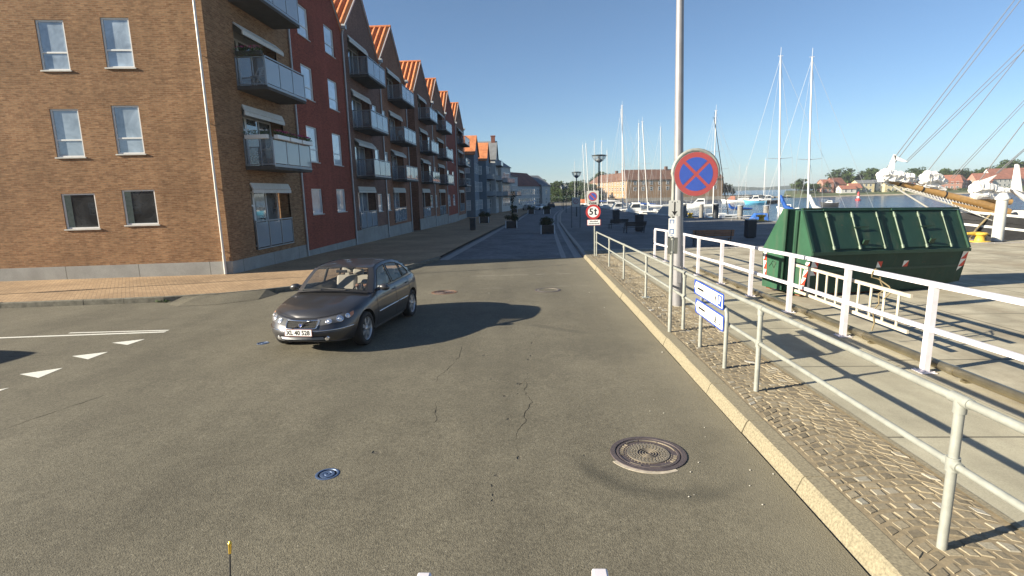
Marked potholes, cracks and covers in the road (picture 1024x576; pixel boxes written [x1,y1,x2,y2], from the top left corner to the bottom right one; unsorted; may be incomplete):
manhole cover [610,436,687,474]
